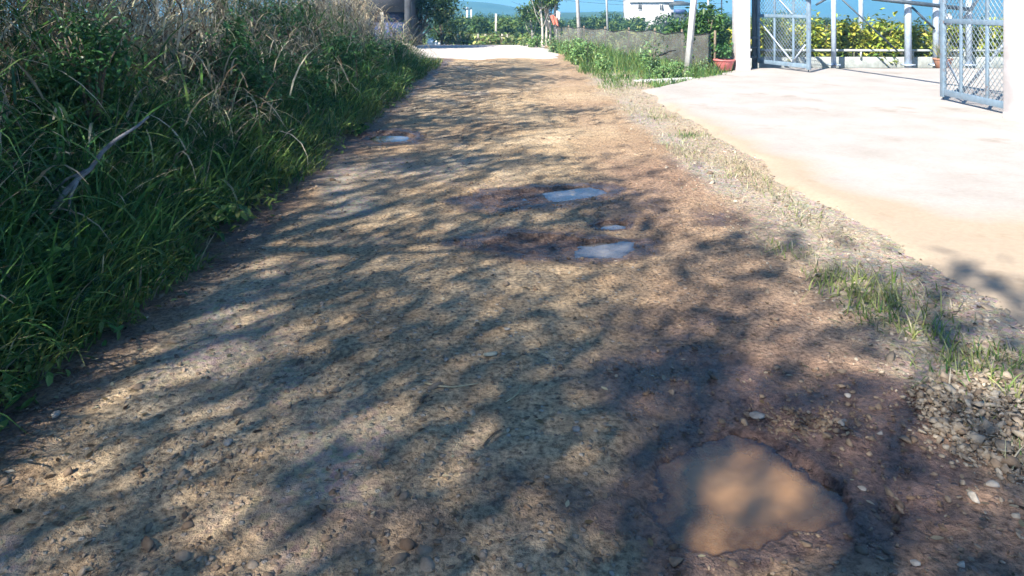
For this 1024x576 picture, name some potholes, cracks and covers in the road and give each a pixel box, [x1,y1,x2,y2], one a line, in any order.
pothole [591,220,632,231]
pothole [346,129,424,145]
pothole [618,418,885,571]
